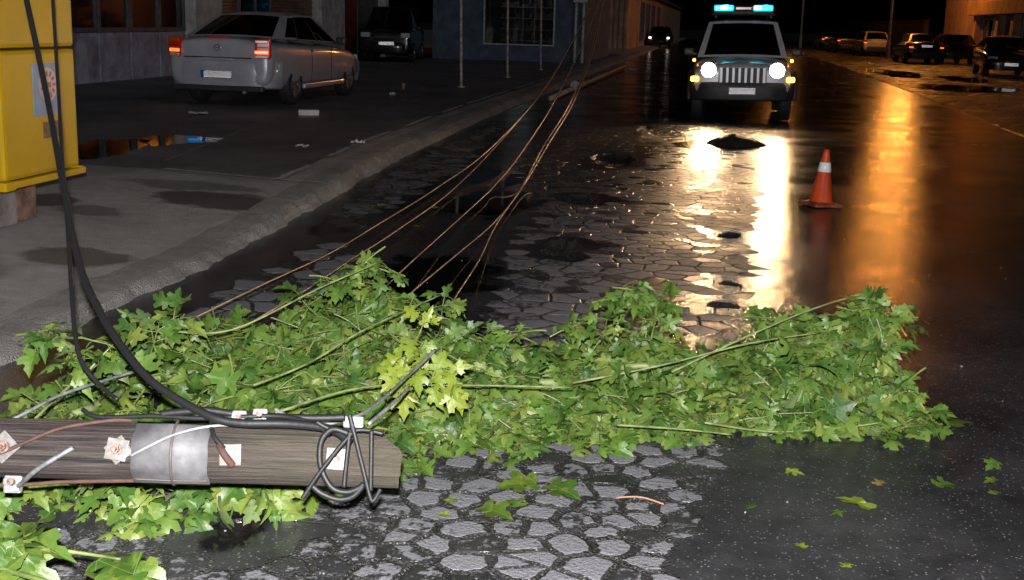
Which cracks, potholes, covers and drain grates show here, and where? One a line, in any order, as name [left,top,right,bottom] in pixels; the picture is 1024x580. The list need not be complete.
pothole [714,231,741,239]
pothole [706,301,745,310]
pothole [585,151,641,170]
pothole [540,236,583,262]
